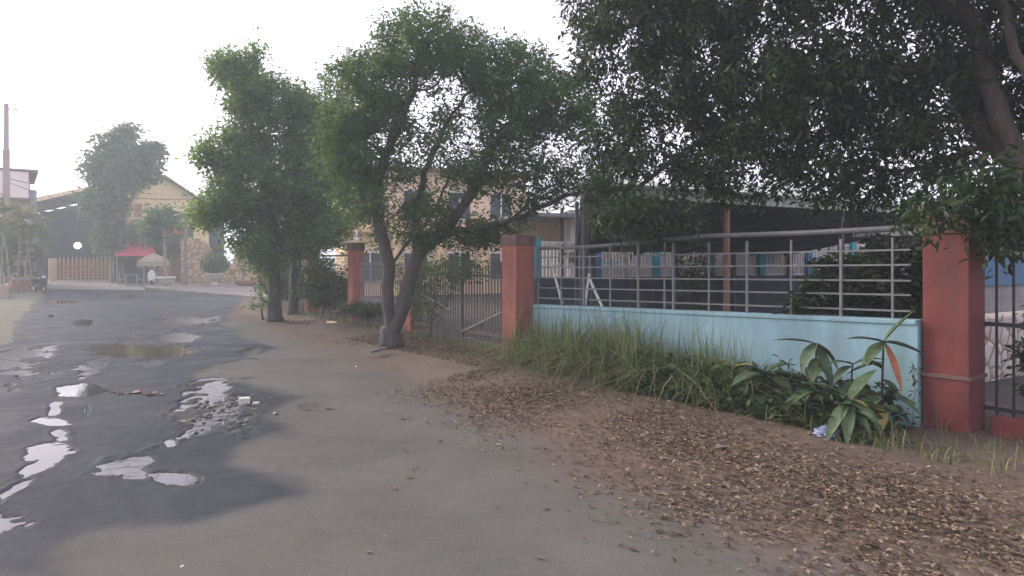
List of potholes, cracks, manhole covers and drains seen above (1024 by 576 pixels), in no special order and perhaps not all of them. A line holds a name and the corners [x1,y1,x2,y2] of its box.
pothole [87,344,195,360]
pothole [55,383,111,397]
pothole [155,471,202,486]
pothole [298,402,336,410]
pothole [17,442,77,479]
pothole [162,373,271,439]
